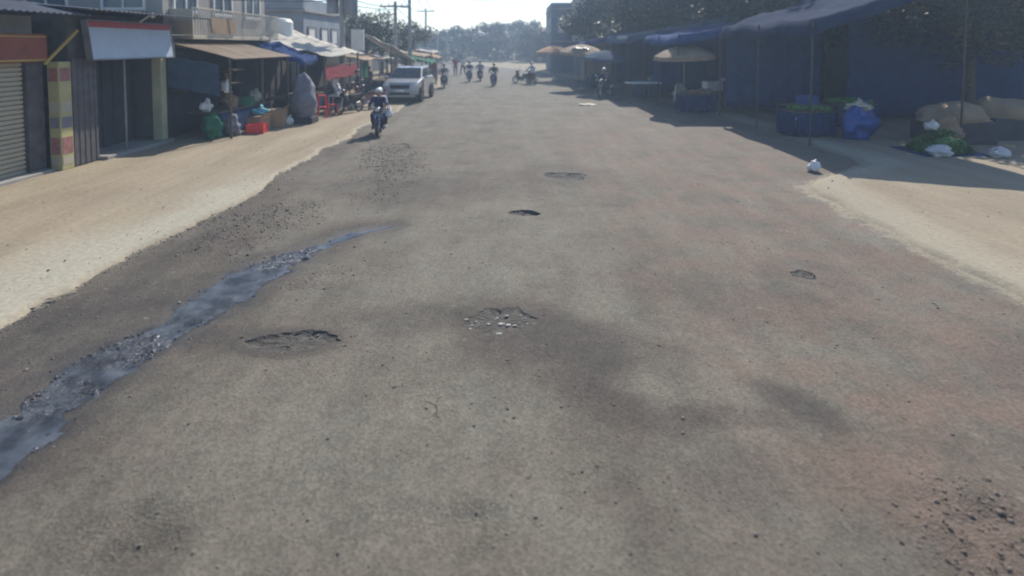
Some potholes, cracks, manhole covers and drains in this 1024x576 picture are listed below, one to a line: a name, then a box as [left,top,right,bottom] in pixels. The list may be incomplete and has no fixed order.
pothole [229,324,355,360]
pothole [779,266,828,285]
pothole [451,302,550,342]
pothole [493,206,557,221]
pothole [532,170,598,184]
